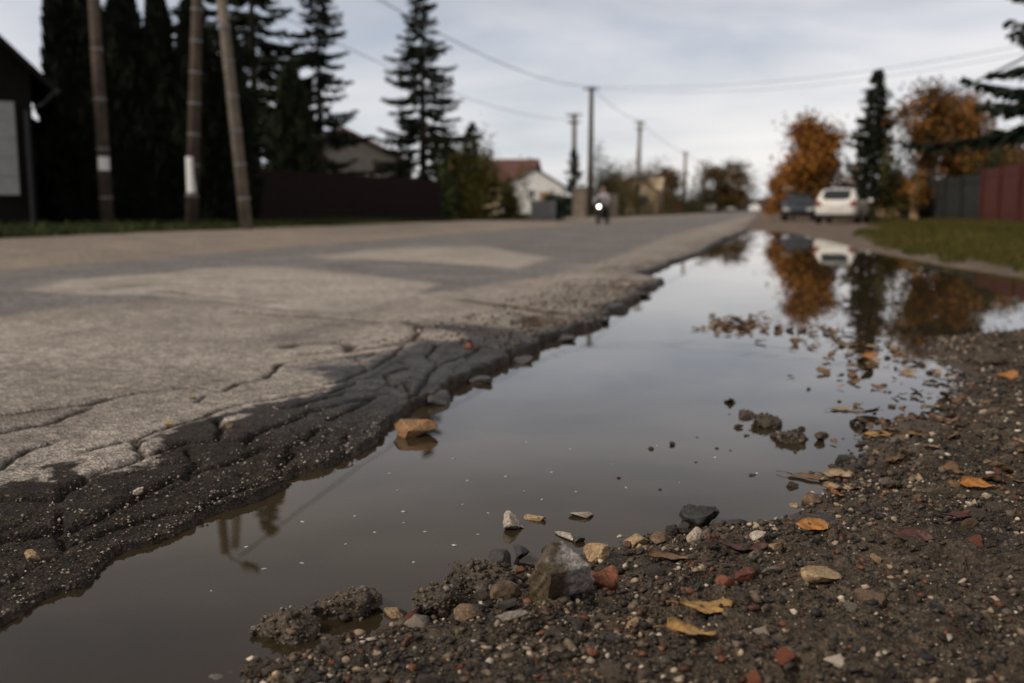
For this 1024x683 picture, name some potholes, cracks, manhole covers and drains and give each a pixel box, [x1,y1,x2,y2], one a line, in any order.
pothole [0,230,946,626]
crack [0,291,523,588]
